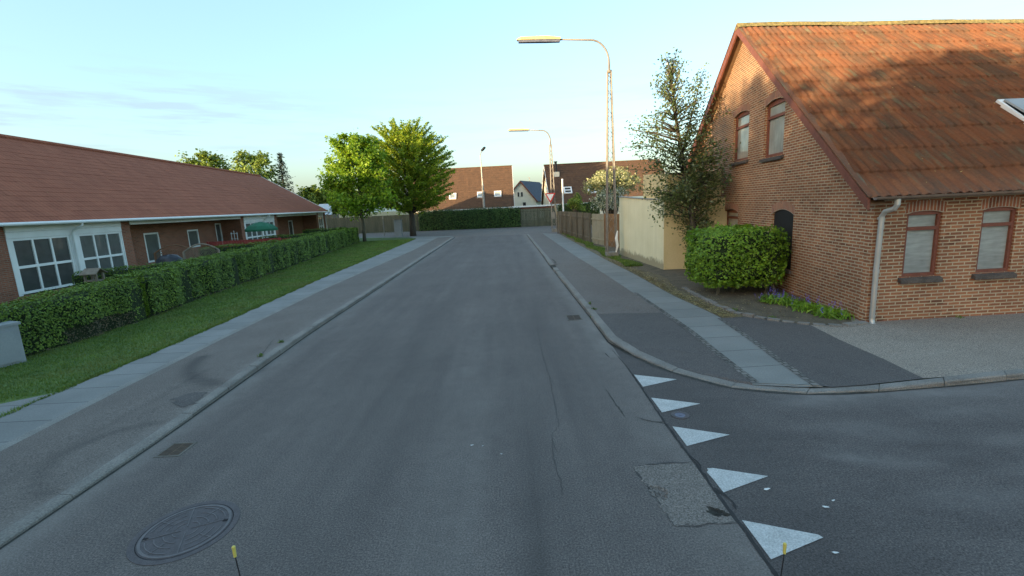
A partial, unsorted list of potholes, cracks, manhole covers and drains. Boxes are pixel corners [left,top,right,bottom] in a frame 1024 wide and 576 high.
crack [537,329,562,492]
utility cover [671,411,689,419]
drain grate [153,442,197,458]
manhole cover [126,500,240,566]
